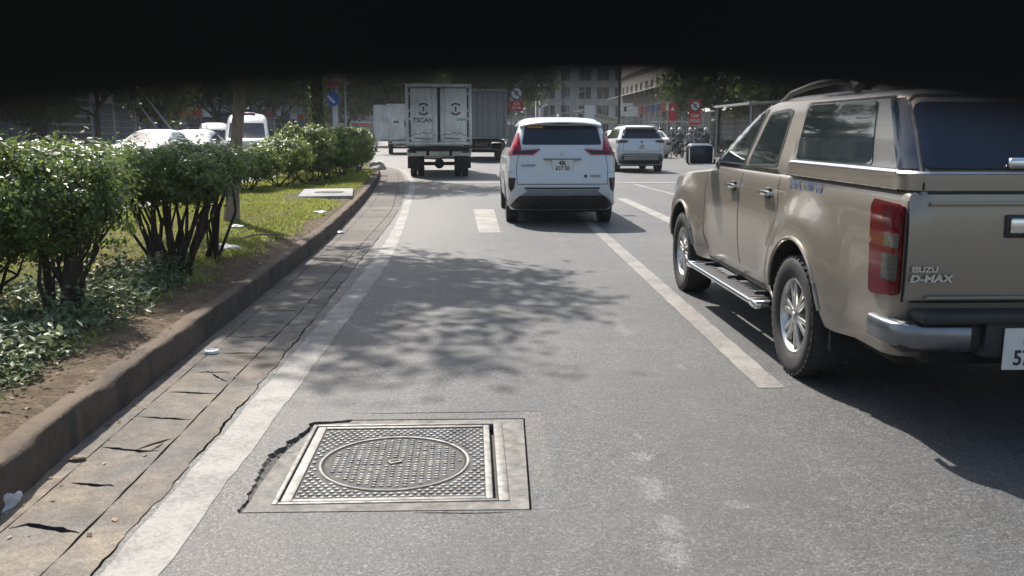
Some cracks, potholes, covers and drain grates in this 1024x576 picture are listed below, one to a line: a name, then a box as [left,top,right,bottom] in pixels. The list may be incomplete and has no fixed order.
manhole cover [242,419,529,513]
crack [9,233,383,576]
